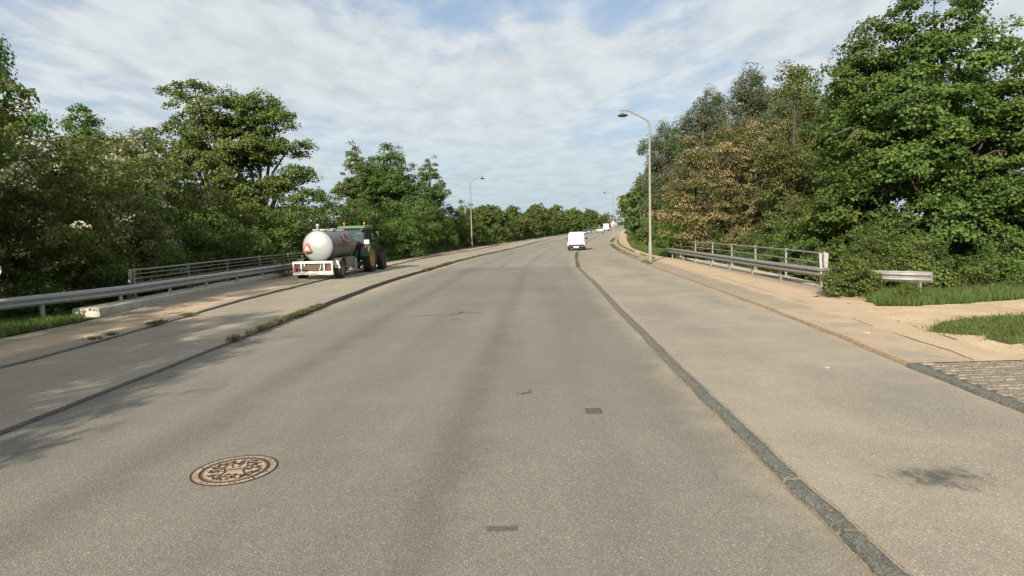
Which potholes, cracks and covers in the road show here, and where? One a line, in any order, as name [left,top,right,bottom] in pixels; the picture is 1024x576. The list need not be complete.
crack [385,311,485,320]
manhole cover [189,455,278,487]
